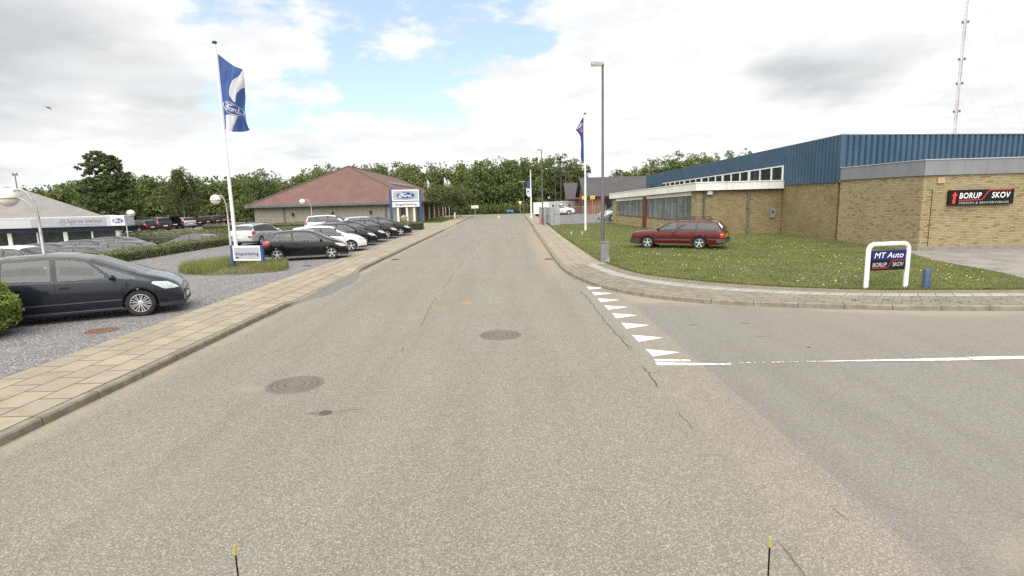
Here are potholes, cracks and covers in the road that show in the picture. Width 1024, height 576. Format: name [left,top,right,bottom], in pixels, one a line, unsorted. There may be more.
crack [779,543,805,576]
crack [580,291,632,349]
manhole cover [265,376,324,394]
manhole cover [479,330,521,340]
